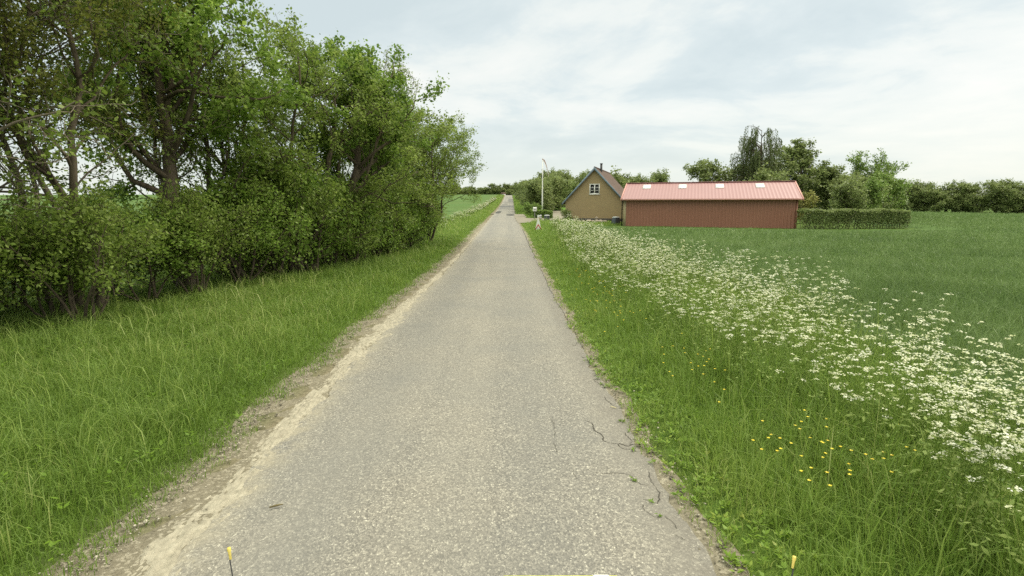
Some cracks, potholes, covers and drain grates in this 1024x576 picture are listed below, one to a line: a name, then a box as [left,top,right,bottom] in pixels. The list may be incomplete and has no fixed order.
crack [596,472,683,539]
